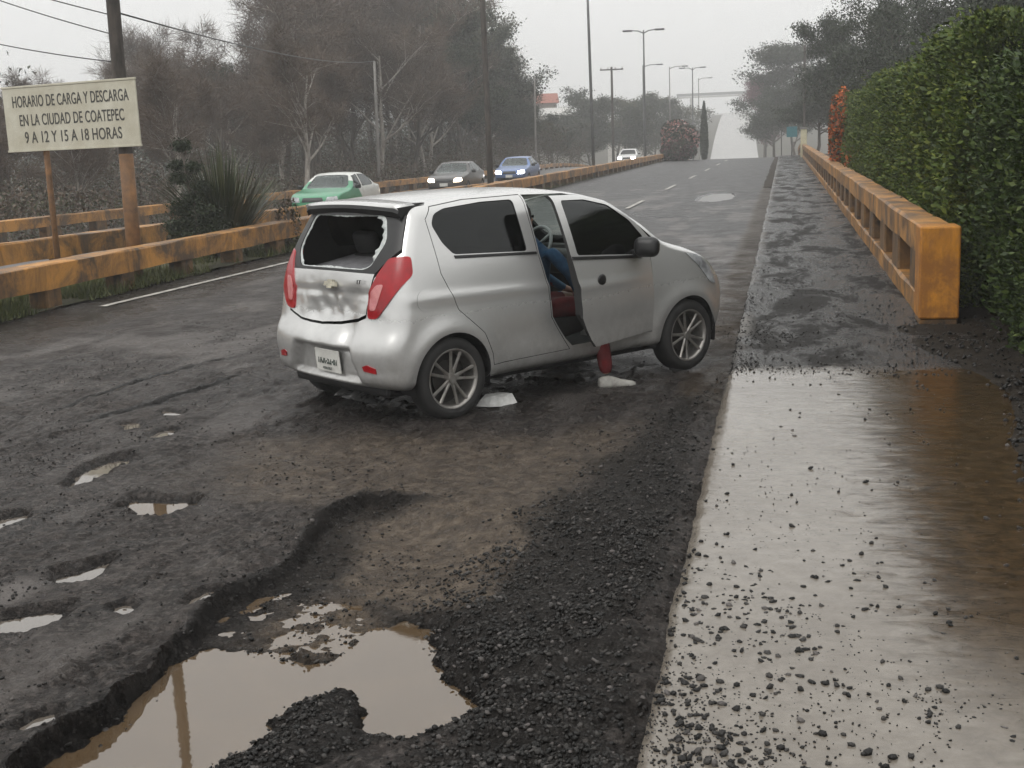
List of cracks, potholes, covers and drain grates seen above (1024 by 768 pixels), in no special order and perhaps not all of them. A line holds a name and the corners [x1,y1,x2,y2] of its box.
pothole [57,449,145,489]
pothole [5,490,531,768]
crack [62,357,238,422]
